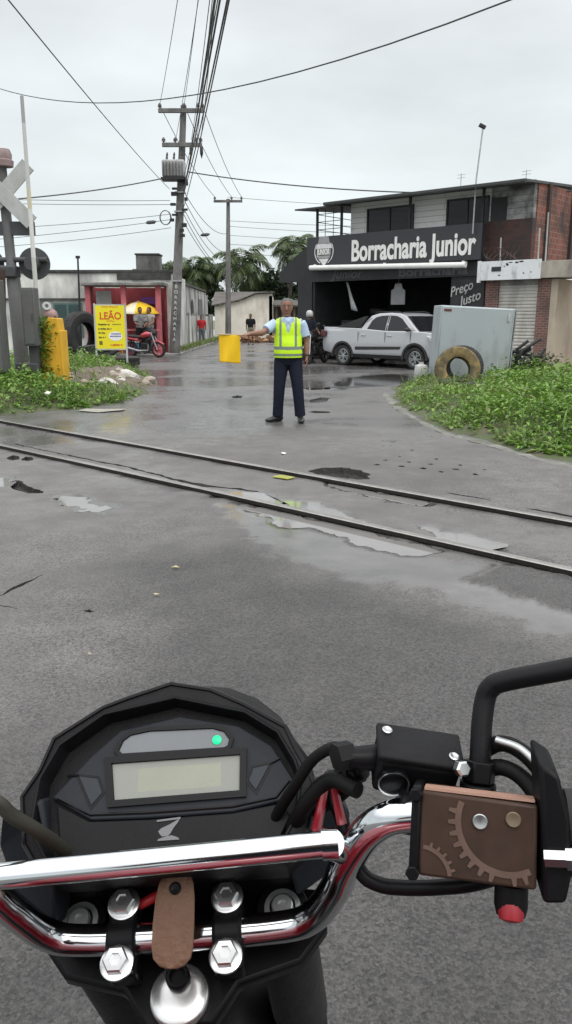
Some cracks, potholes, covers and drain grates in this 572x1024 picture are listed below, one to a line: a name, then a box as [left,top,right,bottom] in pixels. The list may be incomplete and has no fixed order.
crack [0,574,43,609]
pothole [309,467,371,480]
pothole [10,480,43,493]
